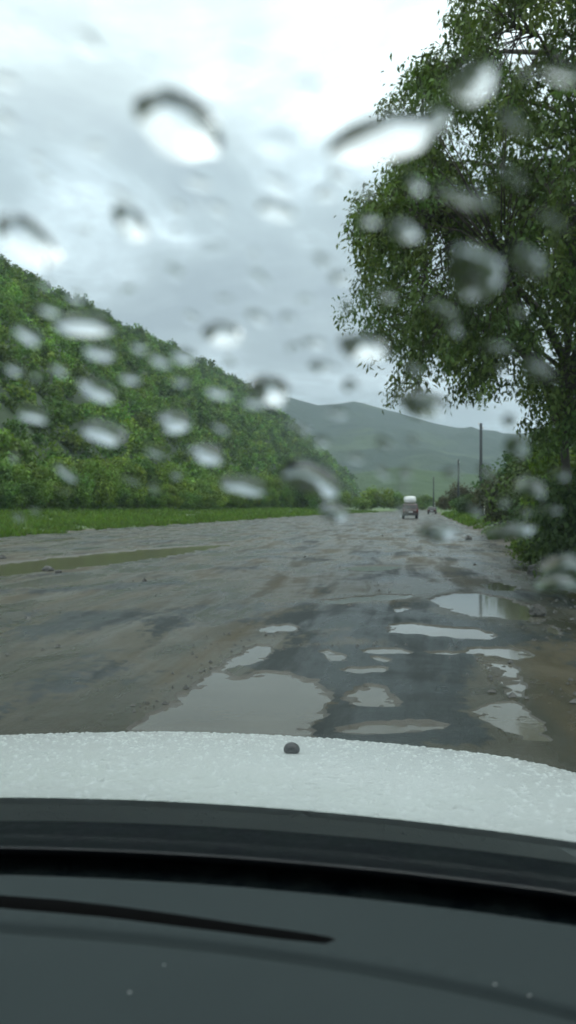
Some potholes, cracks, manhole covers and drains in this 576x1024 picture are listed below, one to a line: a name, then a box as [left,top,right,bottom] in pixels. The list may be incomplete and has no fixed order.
pothole [257,623,301,633]
pothole [423,646,535,660]
pothole [426,592,550,622]
pothole [126,643,335,738]
pothole [340,683,404,707]
pothole [469,700,553,741]
pothole [334,719,450,735]
pothole [382,622,499,640]
pothole [318,649,348,661]
